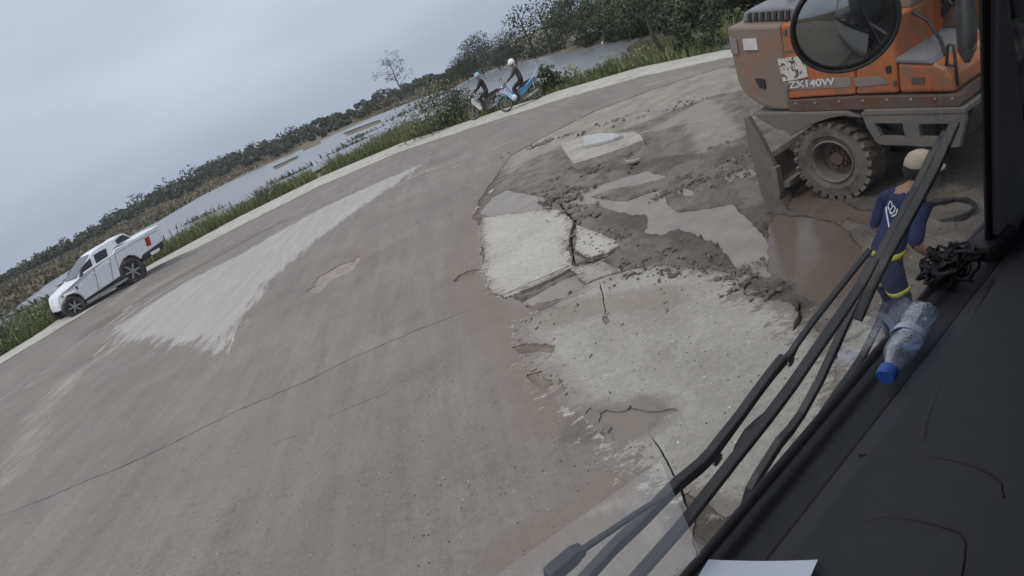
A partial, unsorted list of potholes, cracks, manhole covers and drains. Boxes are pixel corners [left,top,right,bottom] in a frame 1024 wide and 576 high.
pothole [527,372,552,388]
pothole [513,344,555,354]
crack [661,452,688,508]
pothole [307,256,360,293]
